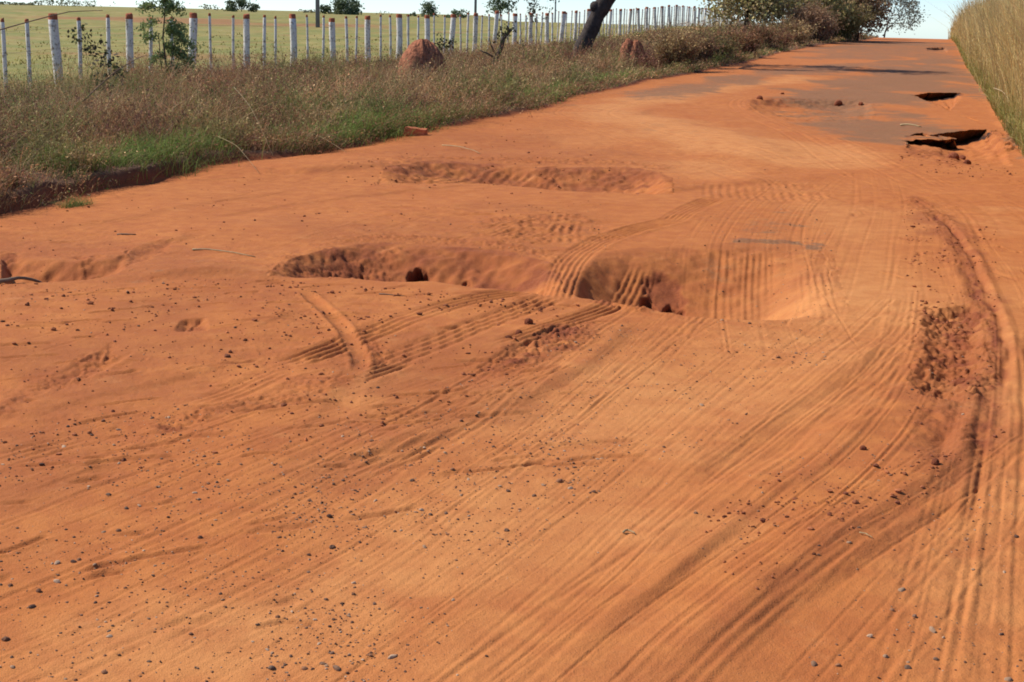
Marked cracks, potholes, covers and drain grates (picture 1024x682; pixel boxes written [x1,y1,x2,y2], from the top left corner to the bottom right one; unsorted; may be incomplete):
pothole [572,249,824,320]
pothole [2,258,124,284]
pothole [392,162,666,194]
pothole [911,305,990,403]
pothole [752,98,872,122]
pothole [906,129,1009,167]
pothole [914,93,978,121]
pothole [279,245,555,296]
